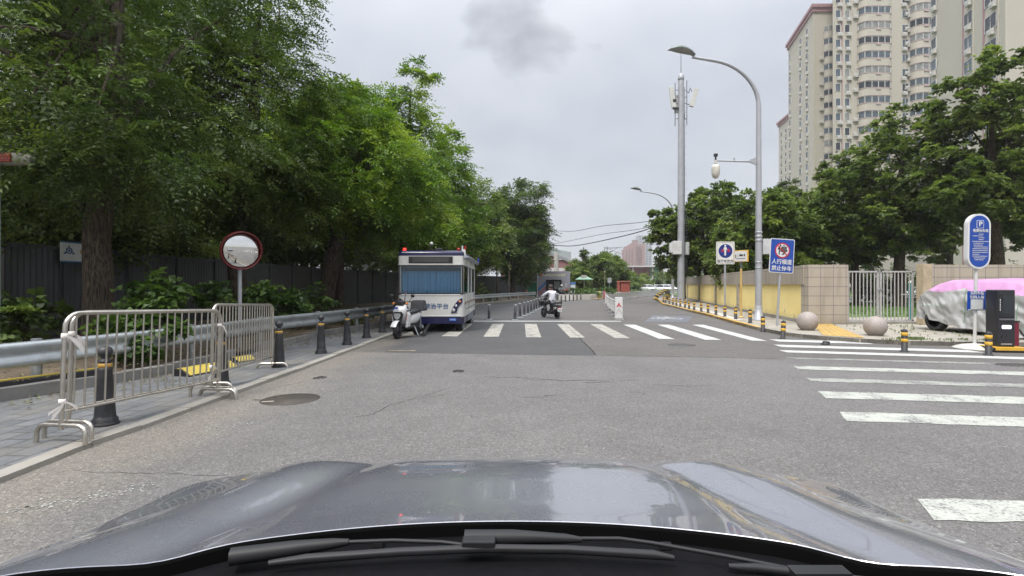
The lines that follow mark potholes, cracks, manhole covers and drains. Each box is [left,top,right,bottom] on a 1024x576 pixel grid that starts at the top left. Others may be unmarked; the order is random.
manhole cover [259,393,320,406]
